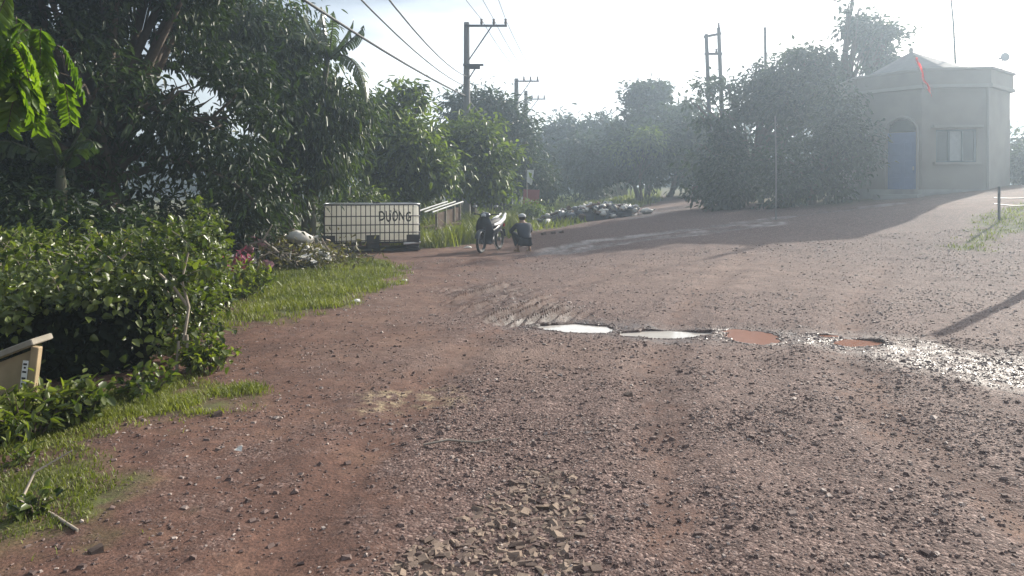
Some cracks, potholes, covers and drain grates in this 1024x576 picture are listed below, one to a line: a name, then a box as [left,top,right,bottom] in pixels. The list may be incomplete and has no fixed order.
pothole [828,337,897,348]
pothole [519,322,624,335]
pothole [607,327,729,339]
pothole [710,326,787,346]
